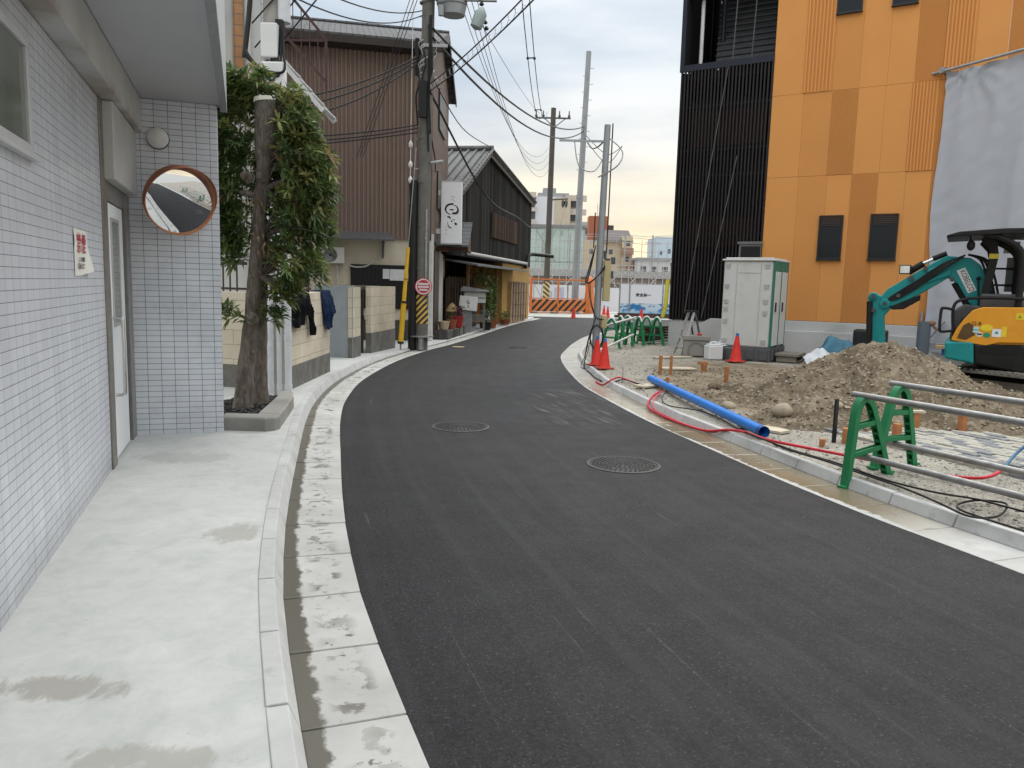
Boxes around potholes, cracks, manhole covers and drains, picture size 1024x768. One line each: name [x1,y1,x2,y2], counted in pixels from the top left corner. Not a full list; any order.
manhole cover [587,456,661,474]
manhole cover [432,421,490,432]
